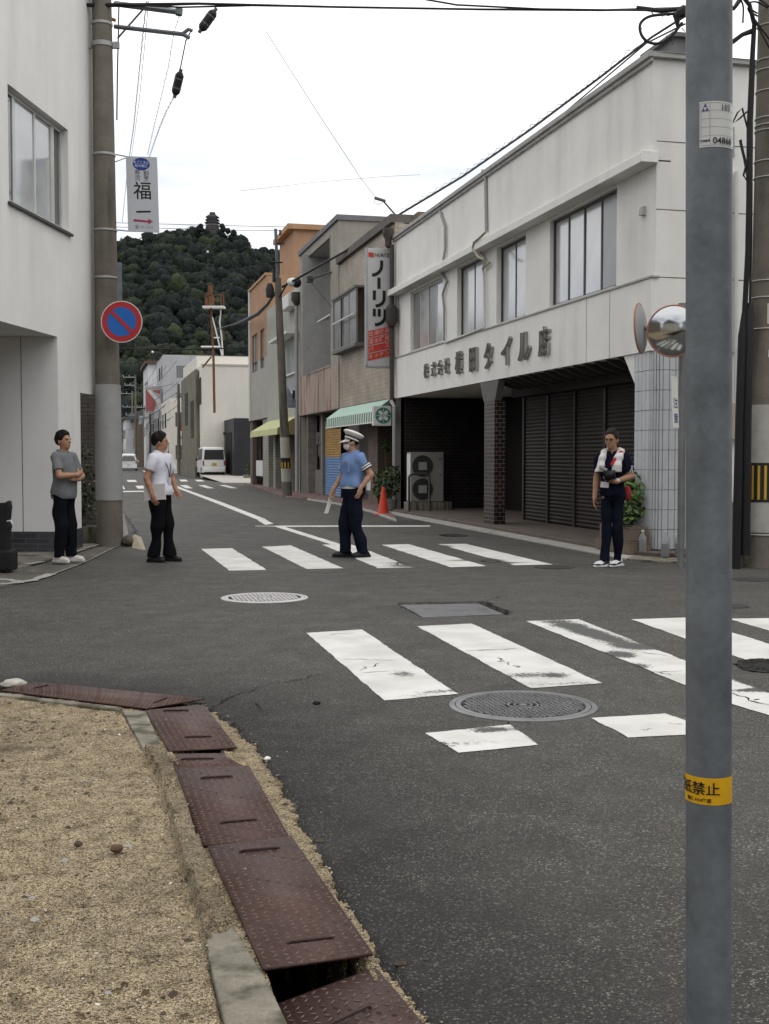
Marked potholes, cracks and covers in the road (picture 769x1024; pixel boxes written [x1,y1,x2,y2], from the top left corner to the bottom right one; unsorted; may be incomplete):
manhole cover [396,601,512,618]
manhole cover [221,592,308,603]
crack [211,659,380,710]
manhole cover [449,690,598,722]
